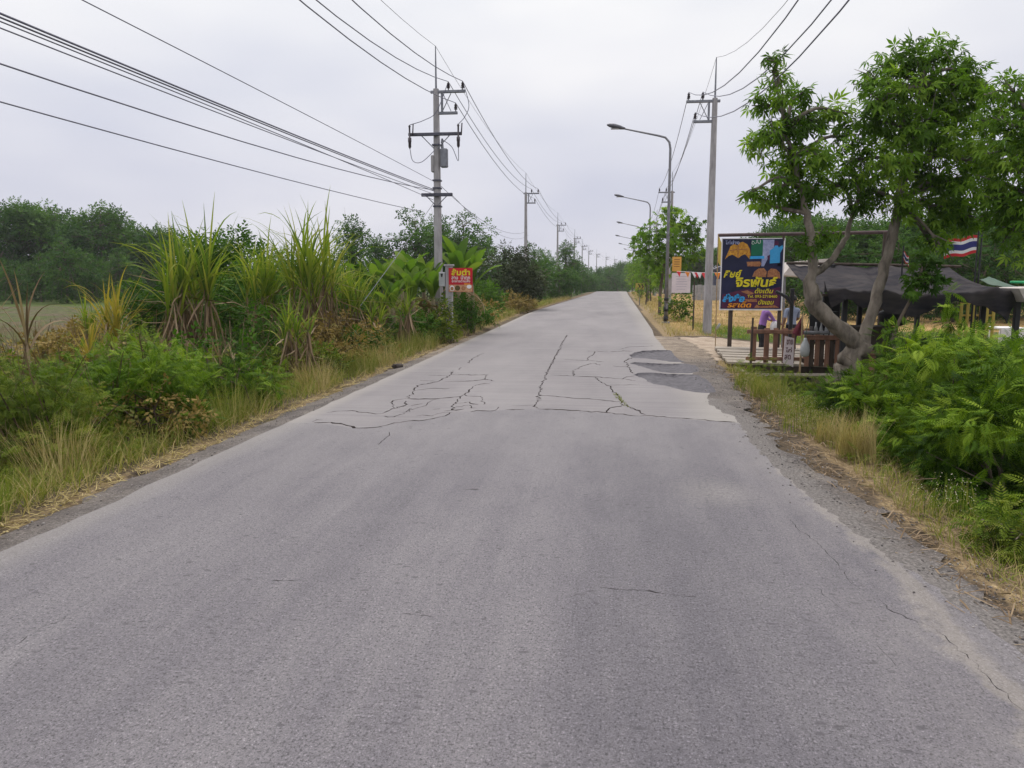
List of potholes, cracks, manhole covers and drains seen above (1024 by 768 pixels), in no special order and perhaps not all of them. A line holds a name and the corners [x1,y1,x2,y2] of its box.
crack [314,354,499,444]
crack [507,335,730,422]
crack [879,599,1022,710]
